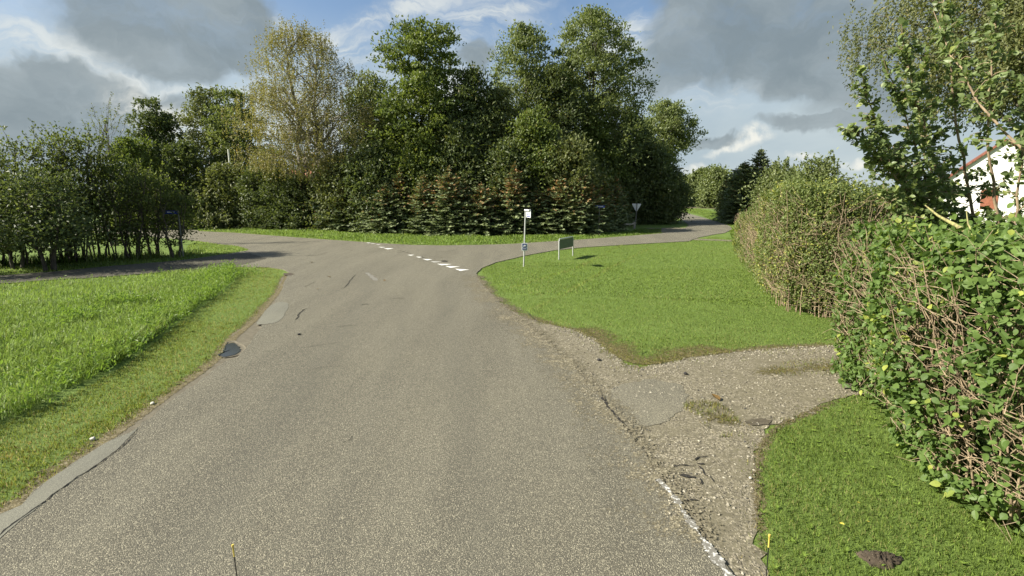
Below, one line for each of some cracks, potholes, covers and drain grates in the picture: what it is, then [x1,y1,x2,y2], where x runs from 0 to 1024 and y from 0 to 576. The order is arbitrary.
crack [601,395,627,426]
pothole [218,340,246,358]
